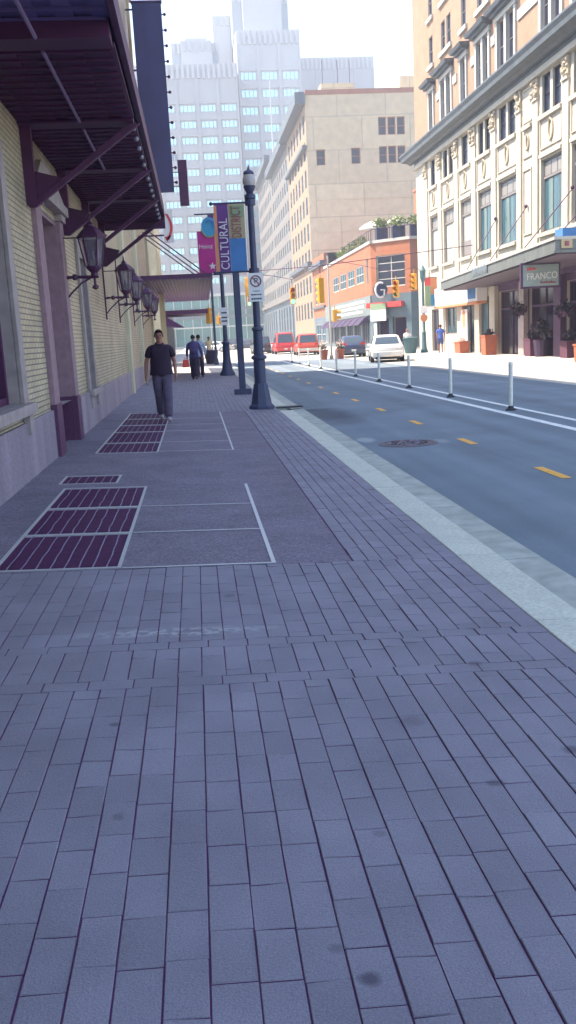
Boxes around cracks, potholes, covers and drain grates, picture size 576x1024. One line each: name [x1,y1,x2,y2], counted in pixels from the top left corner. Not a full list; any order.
drain grate [0,532,132,572]
drain grate [95,442,162,454]
drain grate [105,431,165,443]
drain grate [46,486,147,509]
drain grate [22,506,141,536]
drain grate [120,418,168,426]
drain grate [58,475,122,485]
manhole cover [379,439,438,447]
